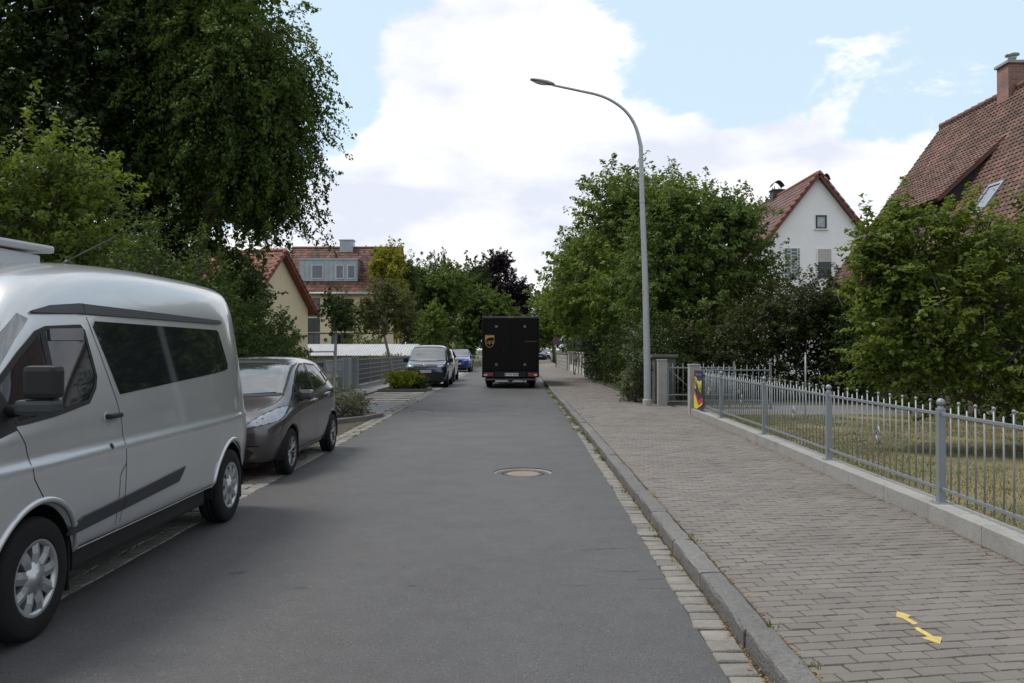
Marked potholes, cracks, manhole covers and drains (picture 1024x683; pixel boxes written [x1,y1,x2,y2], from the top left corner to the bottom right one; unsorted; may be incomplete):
manhole cover [494,468,552,476]
